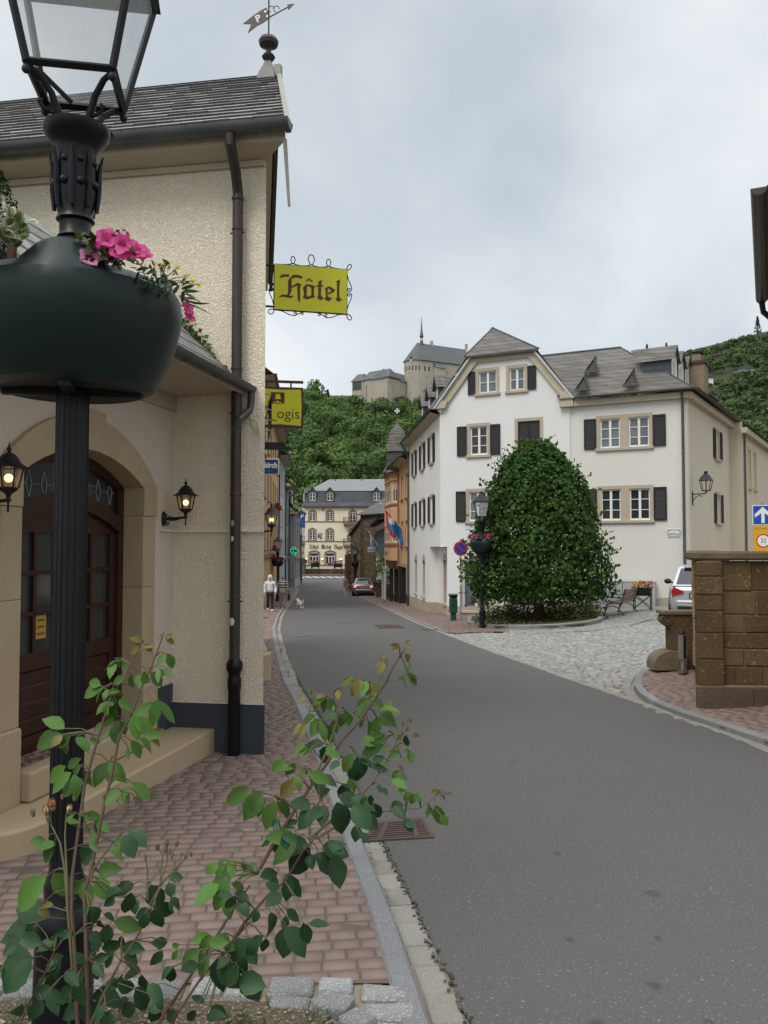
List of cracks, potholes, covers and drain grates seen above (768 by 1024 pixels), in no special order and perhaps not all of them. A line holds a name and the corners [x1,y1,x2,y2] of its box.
drain grate [362,818,435,843]
